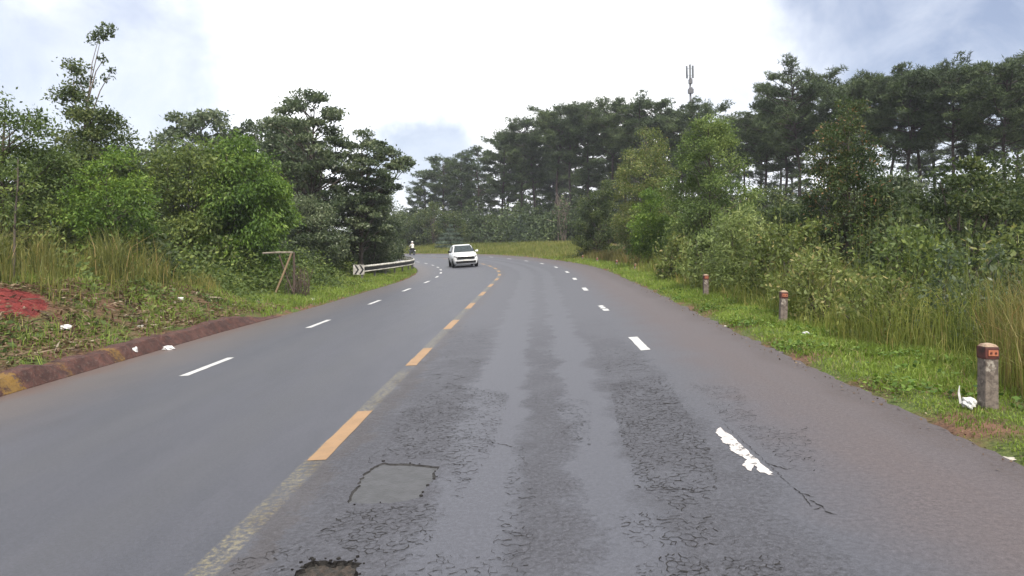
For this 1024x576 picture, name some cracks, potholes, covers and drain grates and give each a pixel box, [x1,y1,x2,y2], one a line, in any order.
crack [320,447,536,576]
crack [368,385,512,498]
crack [602,350,833,576]
pothole [291,555,365,576]
